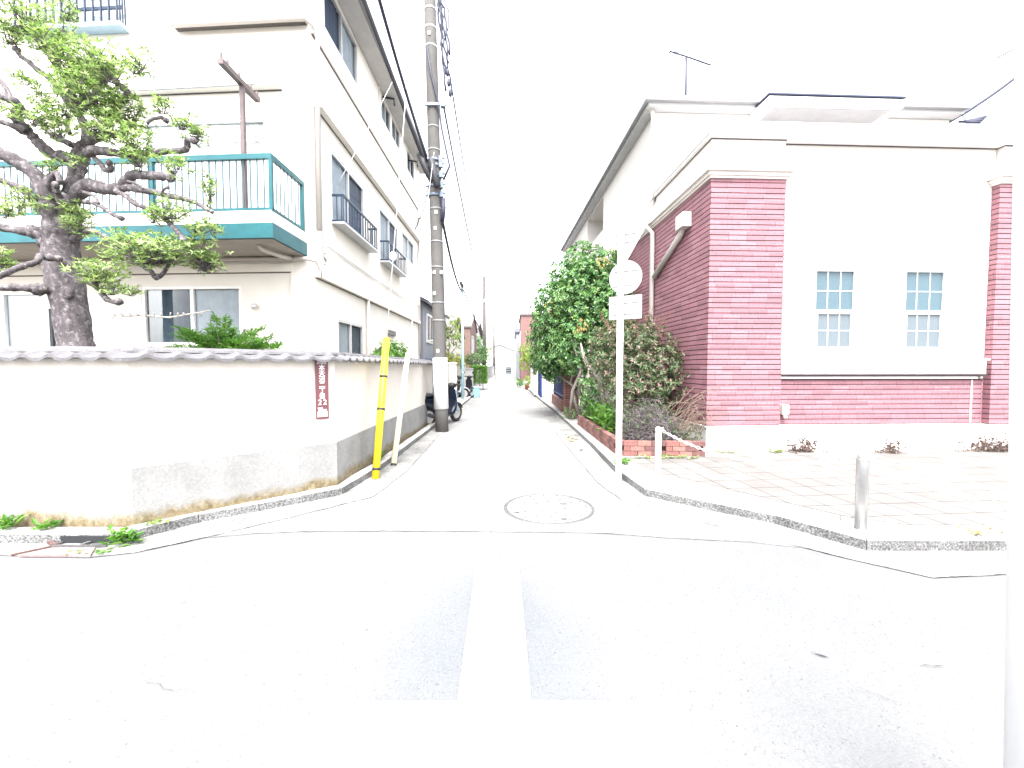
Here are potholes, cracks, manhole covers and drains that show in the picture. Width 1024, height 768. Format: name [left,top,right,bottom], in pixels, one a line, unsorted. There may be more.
drain grate [11,536,114,557]
manhole cover [504,493,595,525]
